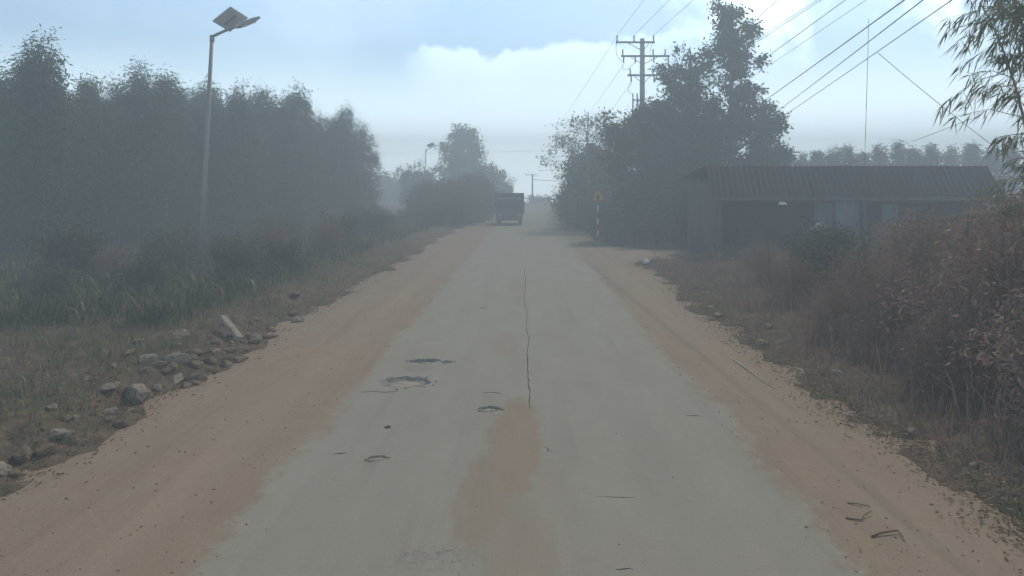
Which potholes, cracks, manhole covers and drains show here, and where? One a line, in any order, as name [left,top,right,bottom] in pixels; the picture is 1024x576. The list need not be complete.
pothole [378,376,438,390]
